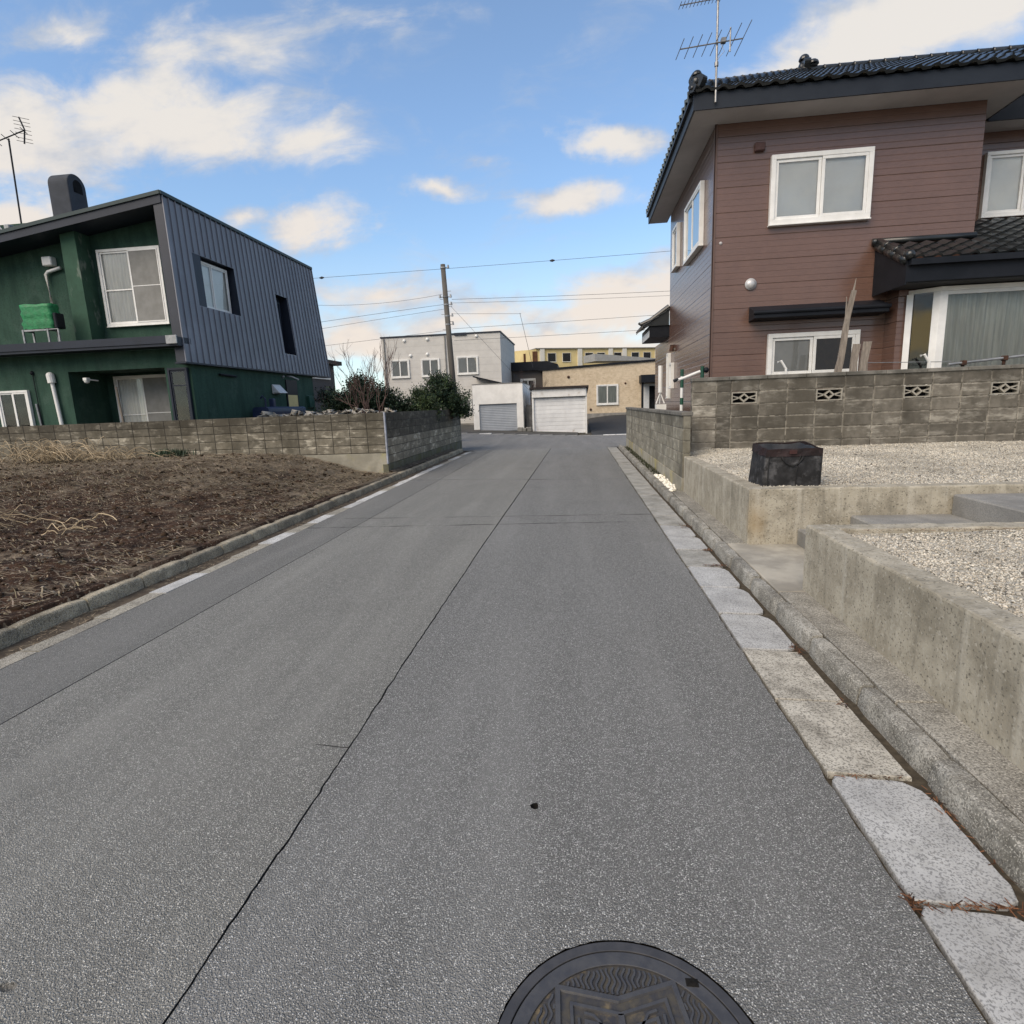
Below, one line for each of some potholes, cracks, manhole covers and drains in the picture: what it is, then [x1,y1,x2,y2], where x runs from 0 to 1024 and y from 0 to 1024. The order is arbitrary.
manhole cover [499,942,752,1024]
